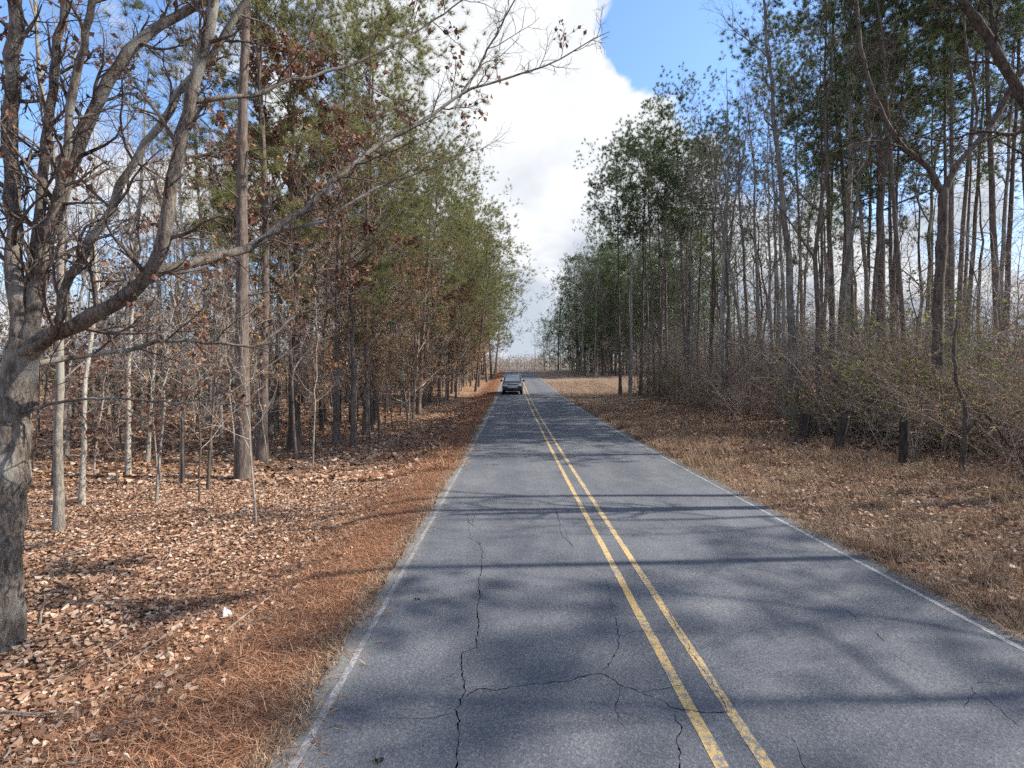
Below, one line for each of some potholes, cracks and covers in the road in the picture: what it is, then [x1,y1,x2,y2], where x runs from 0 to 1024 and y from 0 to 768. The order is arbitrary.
crack [965,682,1022,728]
crack [399,514,726,768]
